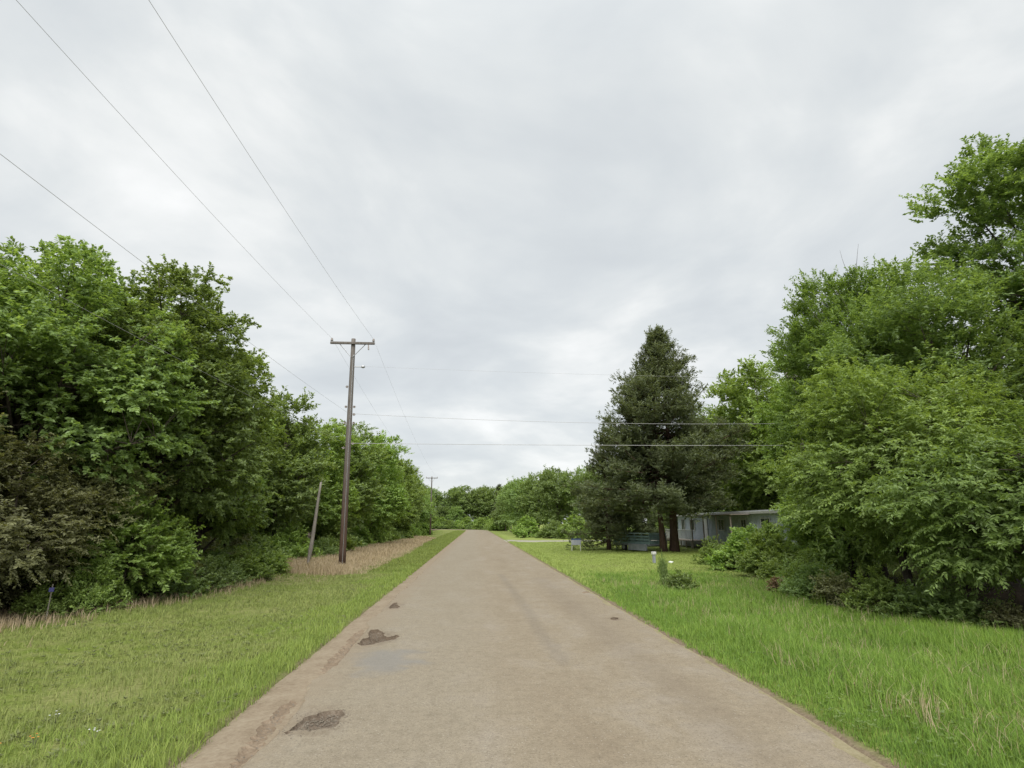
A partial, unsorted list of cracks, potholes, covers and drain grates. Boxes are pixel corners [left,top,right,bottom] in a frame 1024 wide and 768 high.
pothole [355,629,402,647]
pothole [254,707,364,741]
